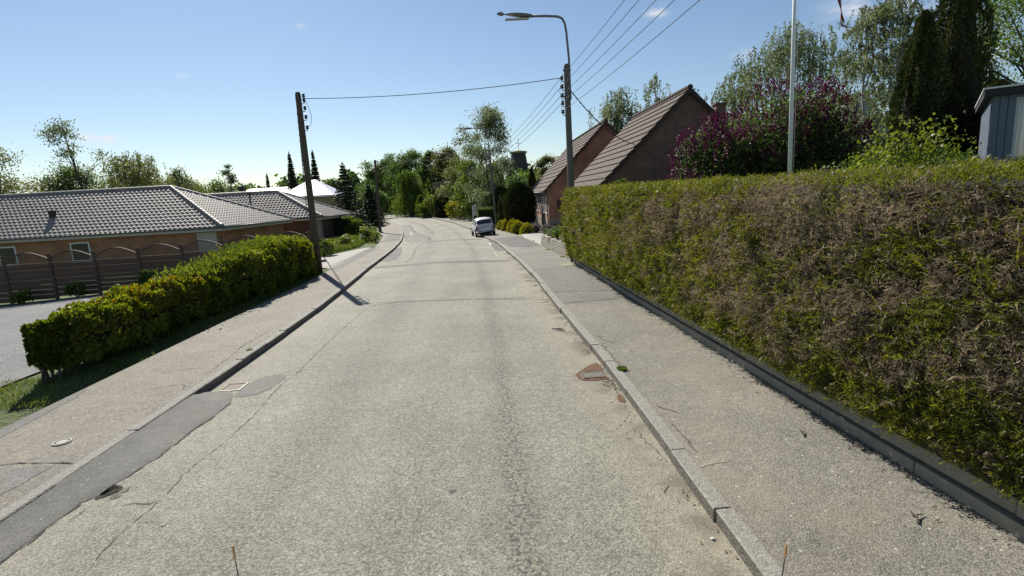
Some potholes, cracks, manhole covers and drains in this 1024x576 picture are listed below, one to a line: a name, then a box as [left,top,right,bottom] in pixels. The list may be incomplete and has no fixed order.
utility cover [51,438,72,446]
drain grate [580,370,607,379]
crack [89,311,363,569]
pothole [95,484,123,499]
